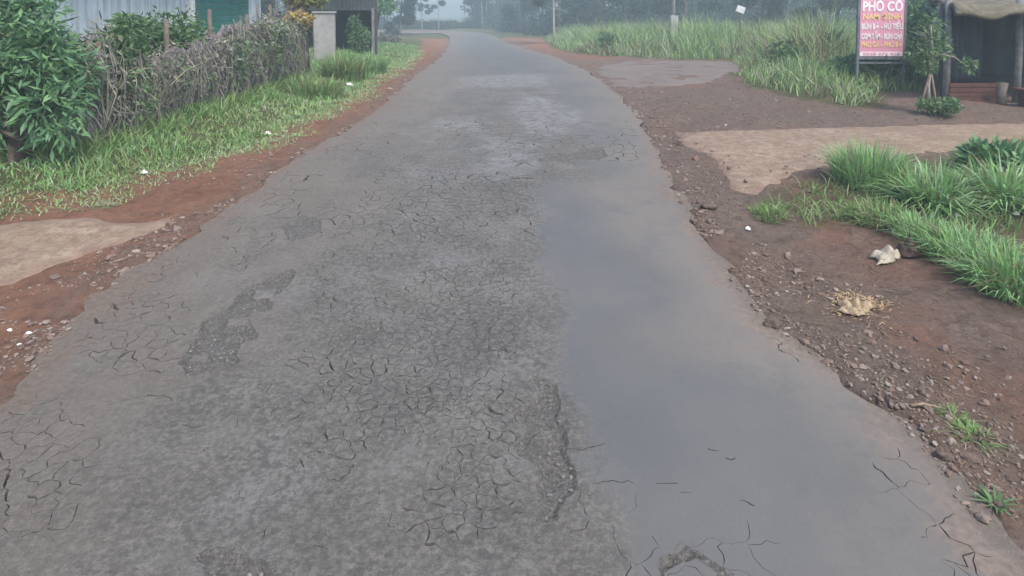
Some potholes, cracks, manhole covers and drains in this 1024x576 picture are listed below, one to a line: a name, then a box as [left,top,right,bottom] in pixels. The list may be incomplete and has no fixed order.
pothole [658,546,736,576]
pothole [192,546,279,576]
crack [203,238,530,551]
crack [261,119,640,239]
pothole [177,269,296,376]
crack [0,392,101,538]
crack [872,448,992,576]
pothole [514,373,578,523]
crack [72,216,277,380]
